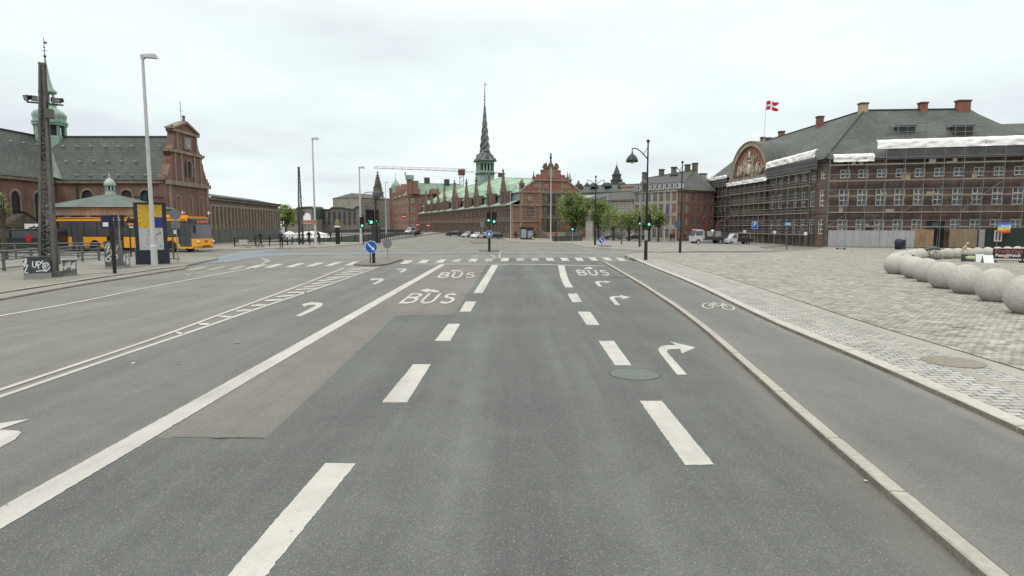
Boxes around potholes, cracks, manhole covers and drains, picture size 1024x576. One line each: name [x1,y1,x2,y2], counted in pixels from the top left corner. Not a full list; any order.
manhole cover [609,368,660,380]
manhole cover [921,356,987,368]
